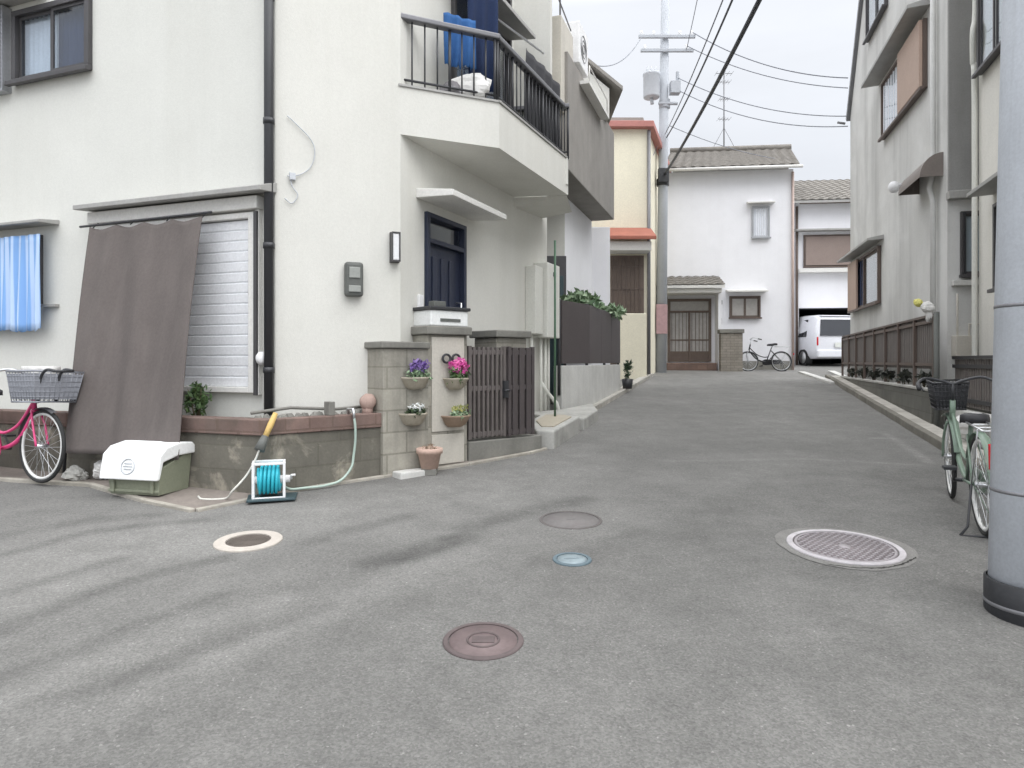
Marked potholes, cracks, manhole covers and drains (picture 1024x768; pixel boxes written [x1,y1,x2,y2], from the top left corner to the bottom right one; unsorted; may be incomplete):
manhole cover [213,530,283,553]
manhole cover [775,528,918,571]
manhole cover [442,622,524,661]
manhole cover [539,511,602,530]
manhole cover [553,552,592,567]
